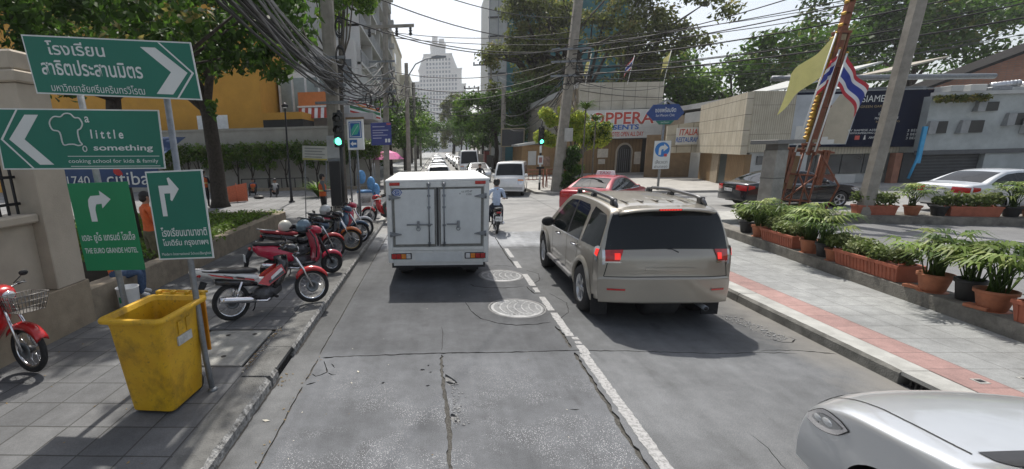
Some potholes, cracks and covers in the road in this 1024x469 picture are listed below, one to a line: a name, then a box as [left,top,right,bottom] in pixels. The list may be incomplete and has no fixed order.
drain grate [903,377,930,390]
crack [465,265,651,469]
manhole cover [478,270,524,282]
manhole cover [488,299,547,318]
